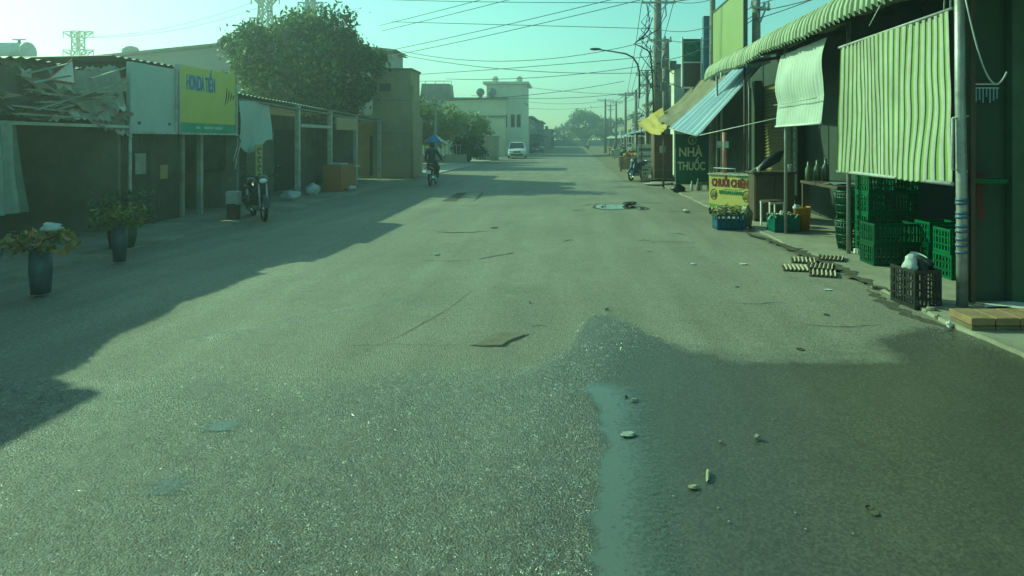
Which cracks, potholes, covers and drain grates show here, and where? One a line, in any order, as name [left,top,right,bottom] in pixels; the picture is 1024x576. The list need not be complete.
crack [351,294,467,355]
